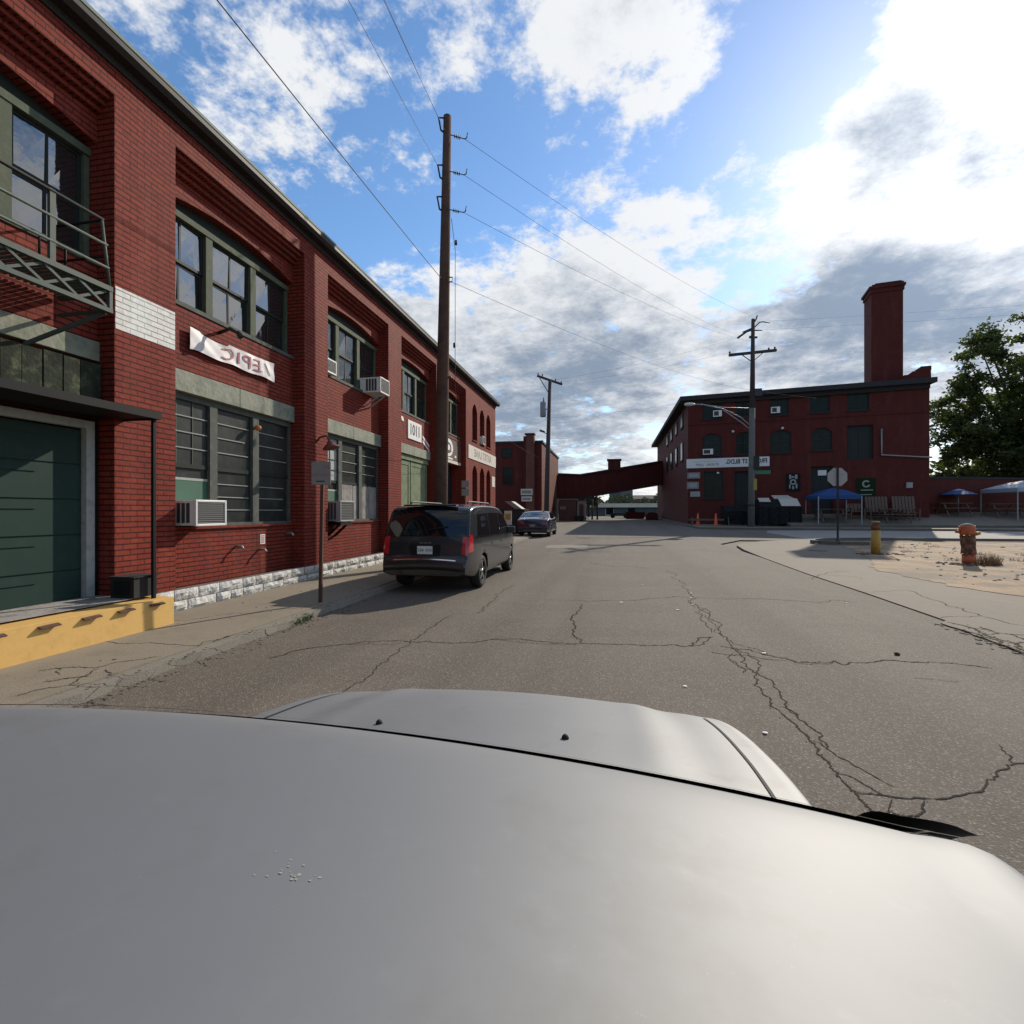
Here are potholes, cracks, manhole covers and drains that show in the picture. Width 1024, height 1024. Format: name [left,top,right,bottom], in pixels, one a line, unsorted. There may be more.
crack [12,619,303,697]
crack [271,573,1024,819]
